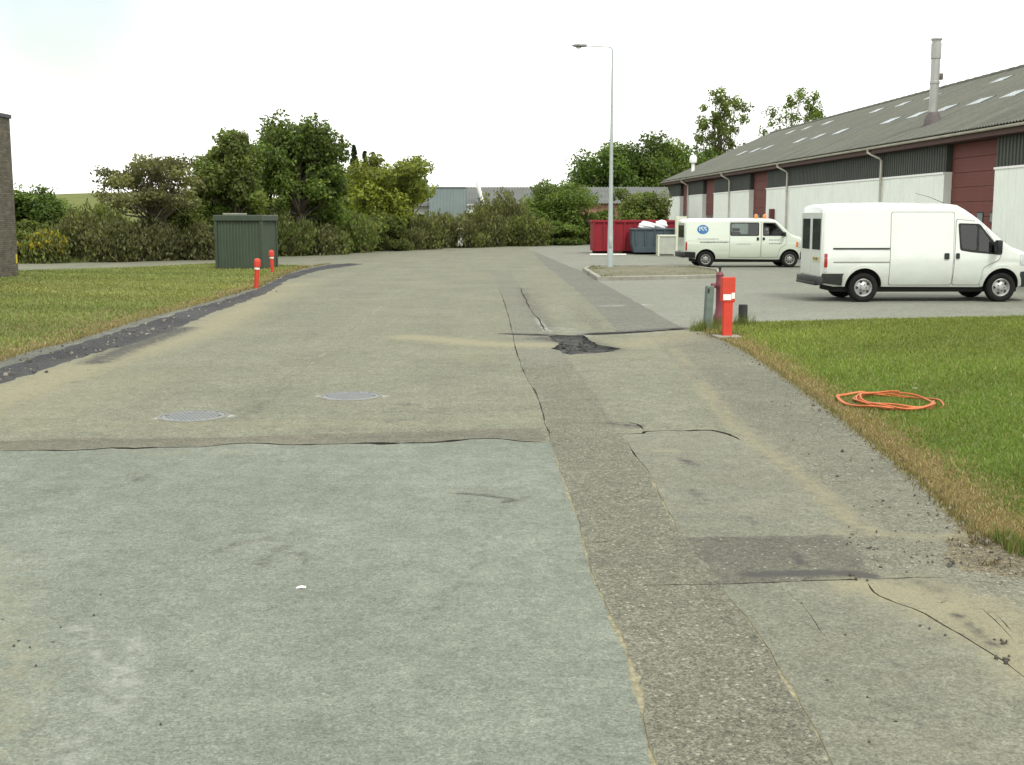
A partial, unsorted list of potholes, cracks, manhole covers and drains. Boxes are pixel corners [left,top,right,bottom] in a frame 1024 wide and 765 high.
pothole [549,335,621,355]
crack [10,289,1024,765]
manhole cover [157,410,229,422]
manhole cover [319,391,382,401]
